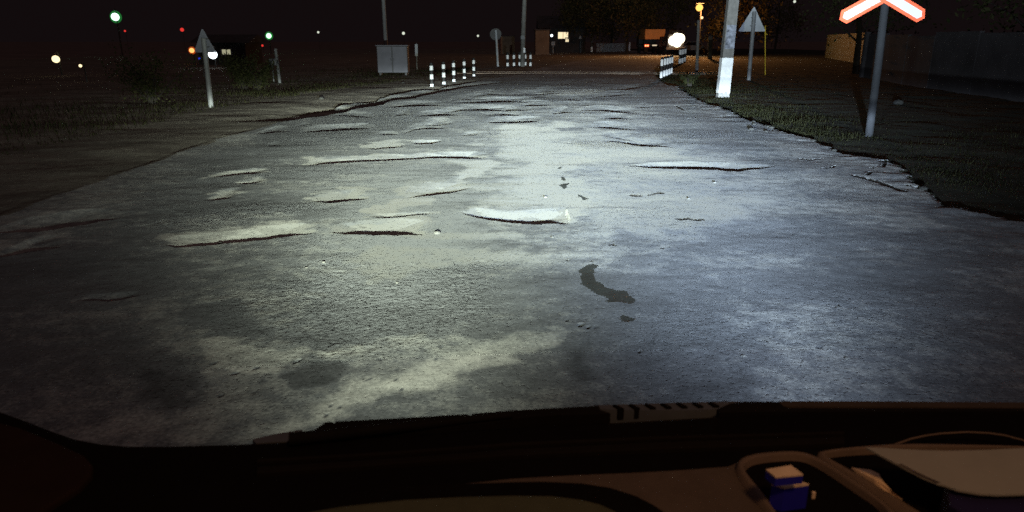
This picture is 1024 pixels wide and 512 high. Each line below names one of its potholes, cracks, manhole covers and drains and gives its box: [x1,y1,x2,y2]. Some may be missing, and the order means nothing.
pothole [309,188,372,203]
pothole [203,168,270,178]
pothole [423,117,454,126]
pothole [599,137,680,148]
pothole [361,139,407,149]
pothole [300,151,492,167]
pothole [459,206,586,224]
pothole [199,187,243,200]
pothole [327,218,430,235]
pothole [624,161,776,171]
pothole [398,174,475,198]
